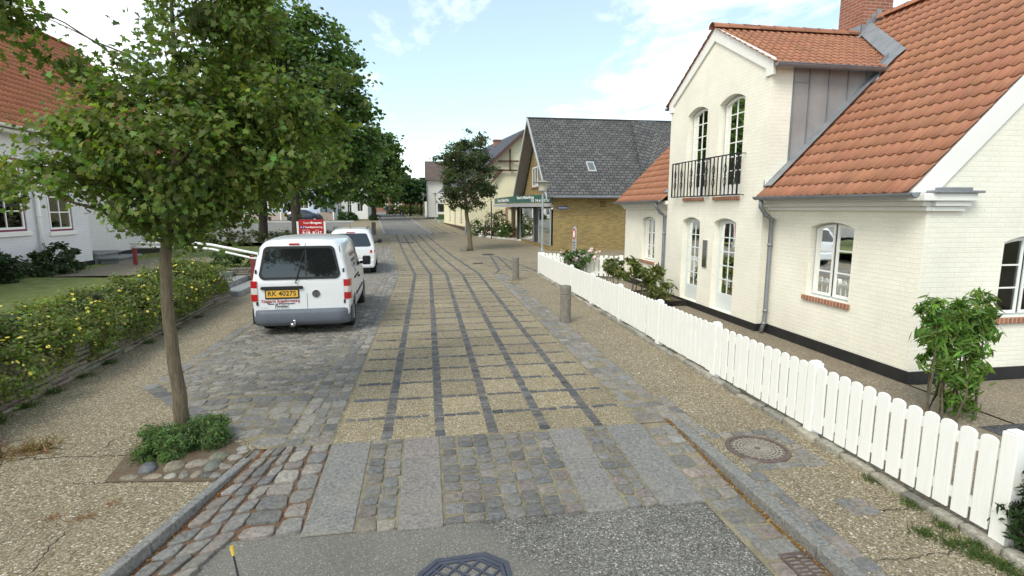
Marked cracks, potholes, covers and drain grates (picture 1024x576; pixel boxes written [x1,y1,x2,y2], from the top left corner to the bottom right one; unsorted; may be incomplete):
manhole cover [725,435,791,463]
drain grate [778,551,833,576]
crack [881,550,955,560]
